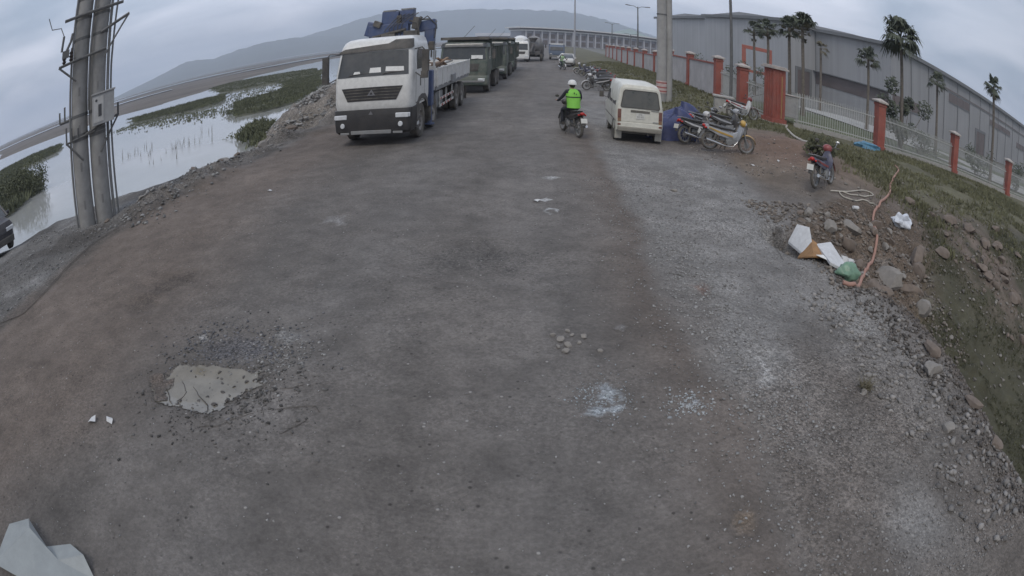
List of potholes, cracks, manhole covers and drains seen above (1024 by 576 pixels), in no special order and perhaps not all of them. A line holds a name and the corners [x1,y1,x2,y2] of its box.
pothole [141,357,280,425]
